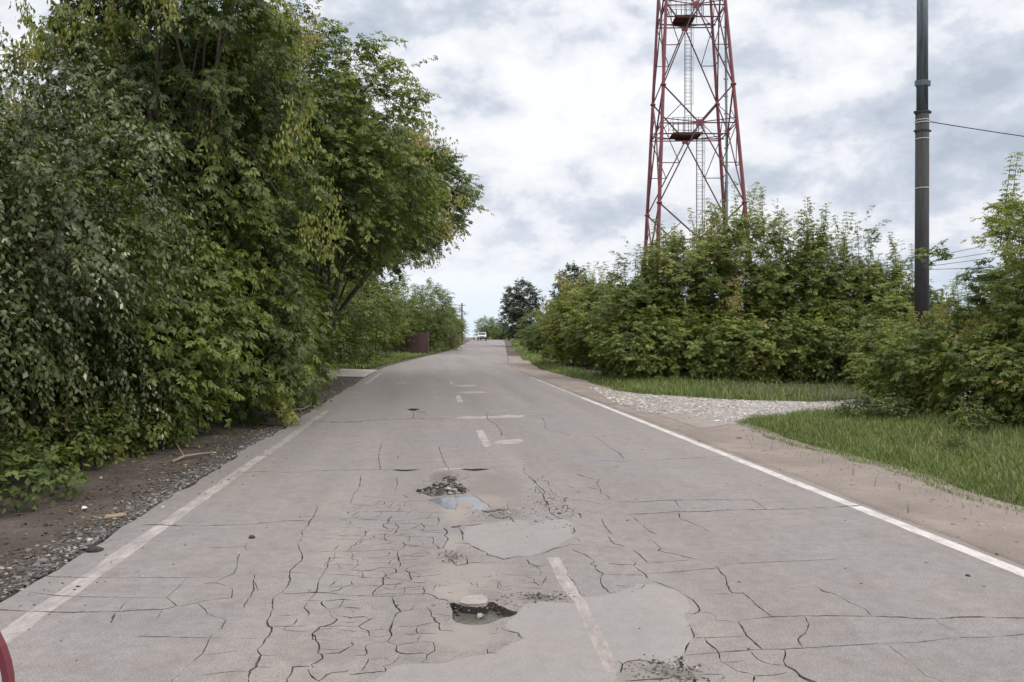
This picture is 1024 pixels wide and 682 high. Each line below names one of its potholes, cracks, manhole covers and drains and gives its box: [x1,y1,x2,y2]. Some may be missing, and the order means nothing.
pothole [416,476,470,497]
crack [0,437,1024,682]
pothole [449,602,518,620]
